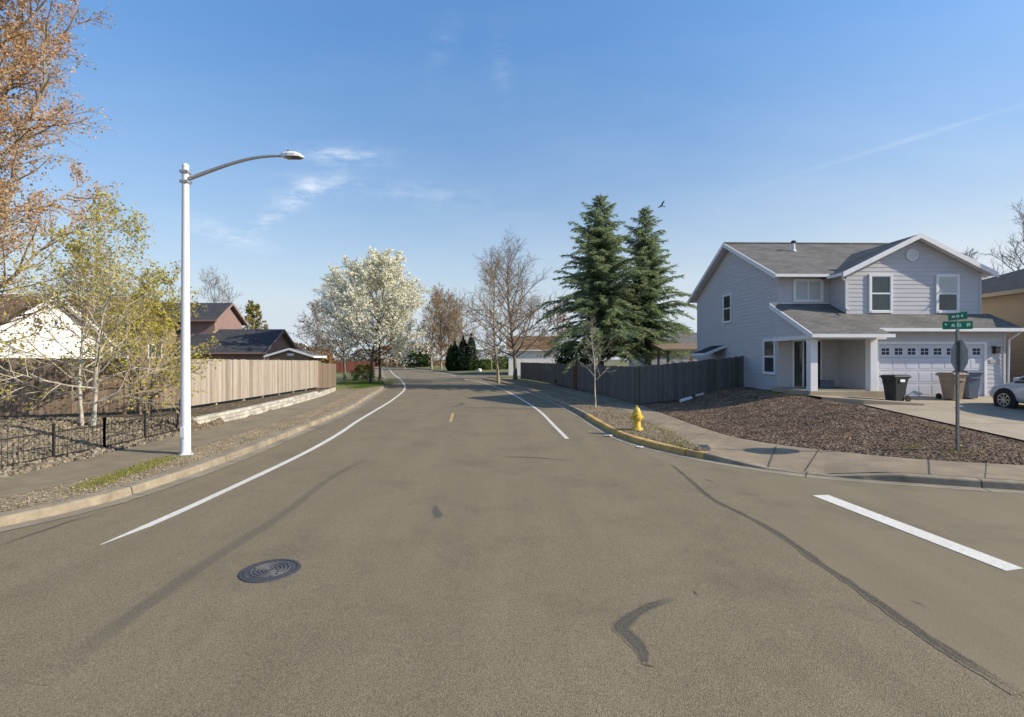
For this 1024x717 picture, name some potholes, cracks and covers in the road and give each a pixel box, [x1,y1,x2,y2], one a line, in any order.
manhole cover [238,559,301,583]
